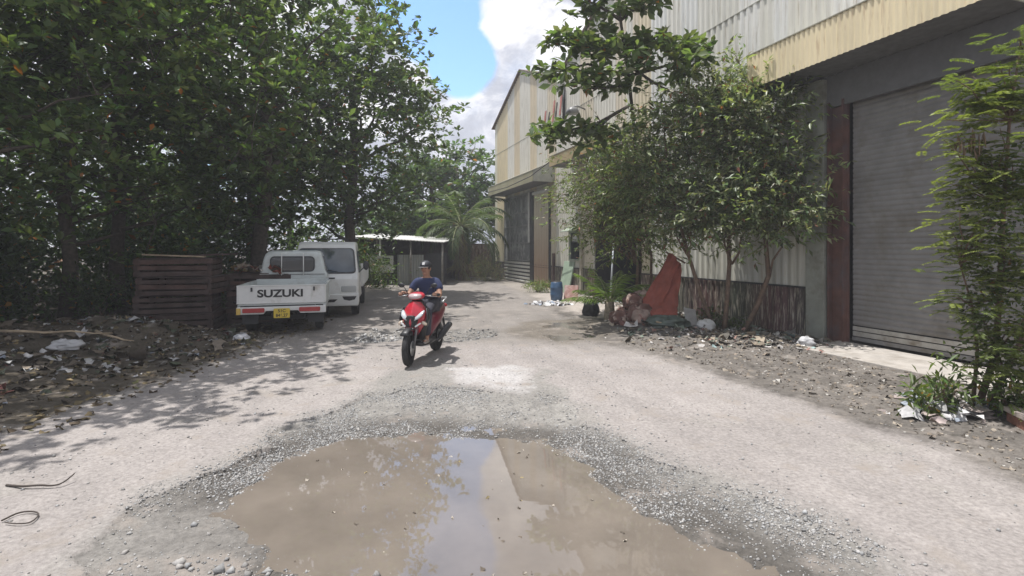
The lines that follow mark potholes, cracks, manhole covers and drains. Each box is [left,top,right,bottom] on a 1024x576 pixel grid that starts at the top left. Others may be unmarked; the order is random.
pothole [443,328,500,342]
pothole [66,385,888,576]
pothole [346,328,404,343]
